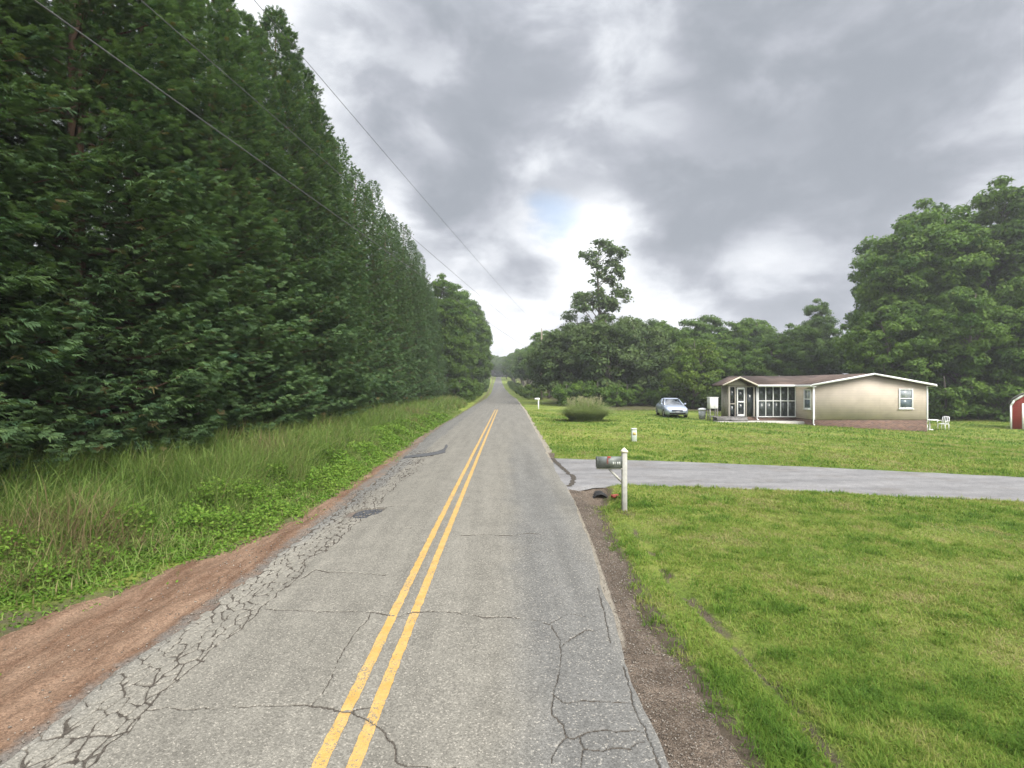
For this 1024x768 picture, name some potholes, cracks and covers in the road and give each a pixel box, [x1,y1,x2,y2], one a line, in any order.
crack [20,451,661,768]
